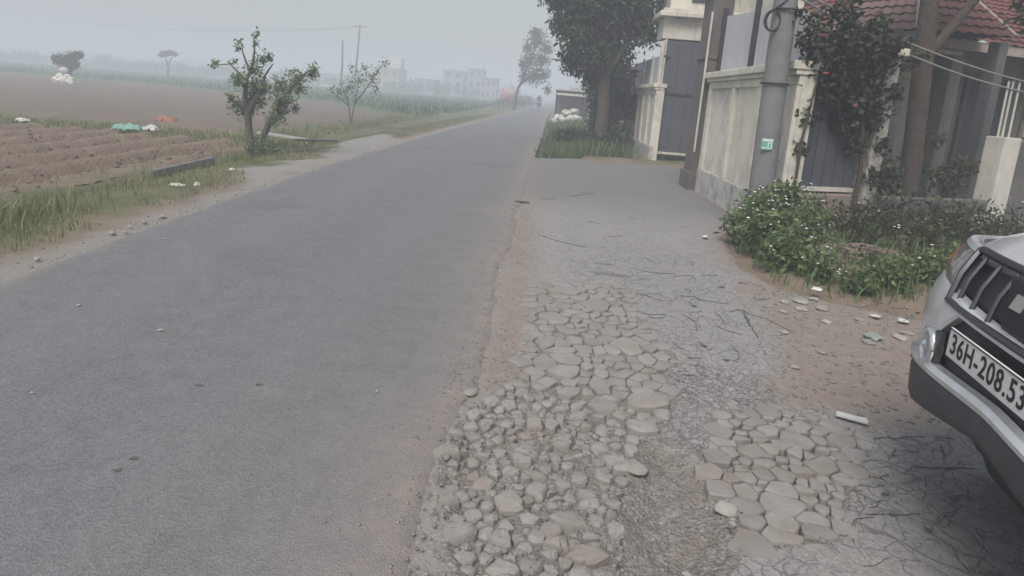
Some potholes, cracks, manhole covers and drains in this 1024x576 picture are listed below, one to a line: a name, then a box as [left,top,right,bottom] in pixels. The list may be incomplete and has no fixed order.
crack [809,436,978,542]
pothole [707,406,876,549]
pothole [436,282,679,576]
pothole [617,437,744,576]
crack [625,257,789,393]
